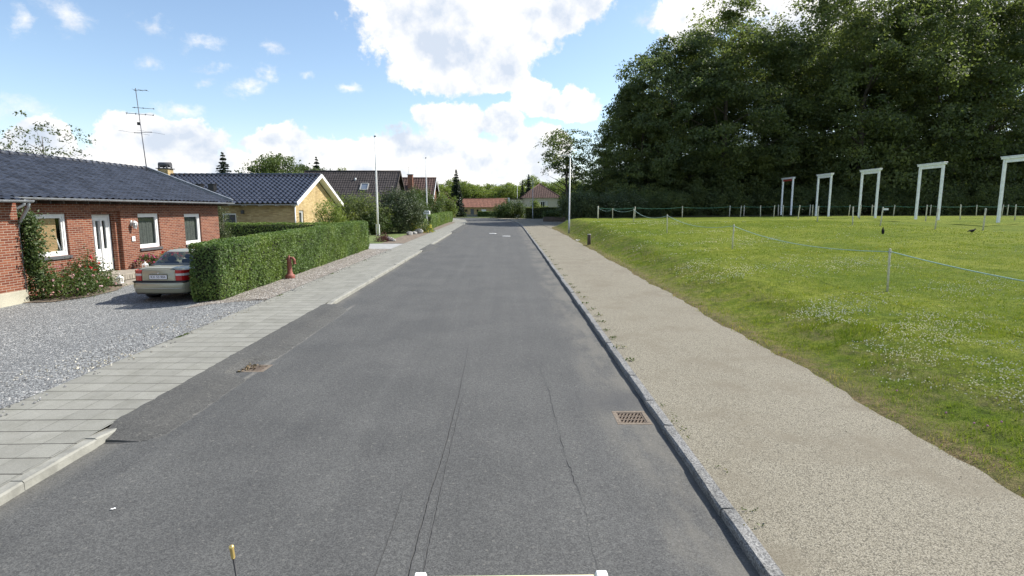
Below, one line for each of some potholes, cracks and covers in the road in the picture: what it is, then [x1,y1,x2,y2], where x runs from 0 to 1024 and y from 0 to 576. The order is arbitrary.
crack [540,368,599,570]
drain grate [611,411,653,425]
crack [373,344,469,576]
